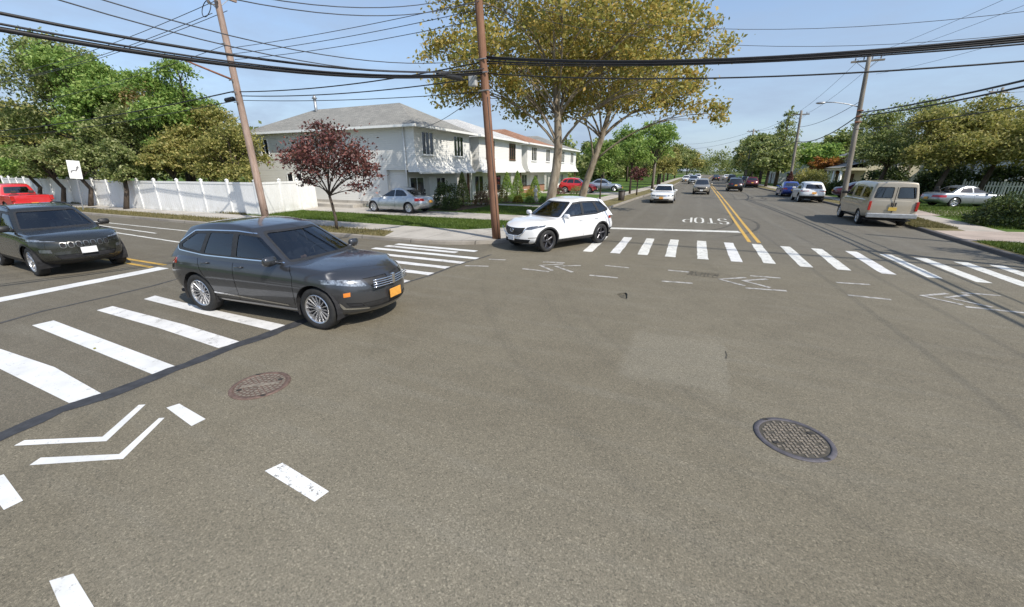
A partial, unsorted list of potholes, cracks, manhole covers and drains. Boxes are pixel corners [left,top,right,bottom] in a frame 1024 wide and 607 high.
pothole [612,291,631,300]
manhole cover [754,417,838,463]
manhole cover [228,372,291,400]
